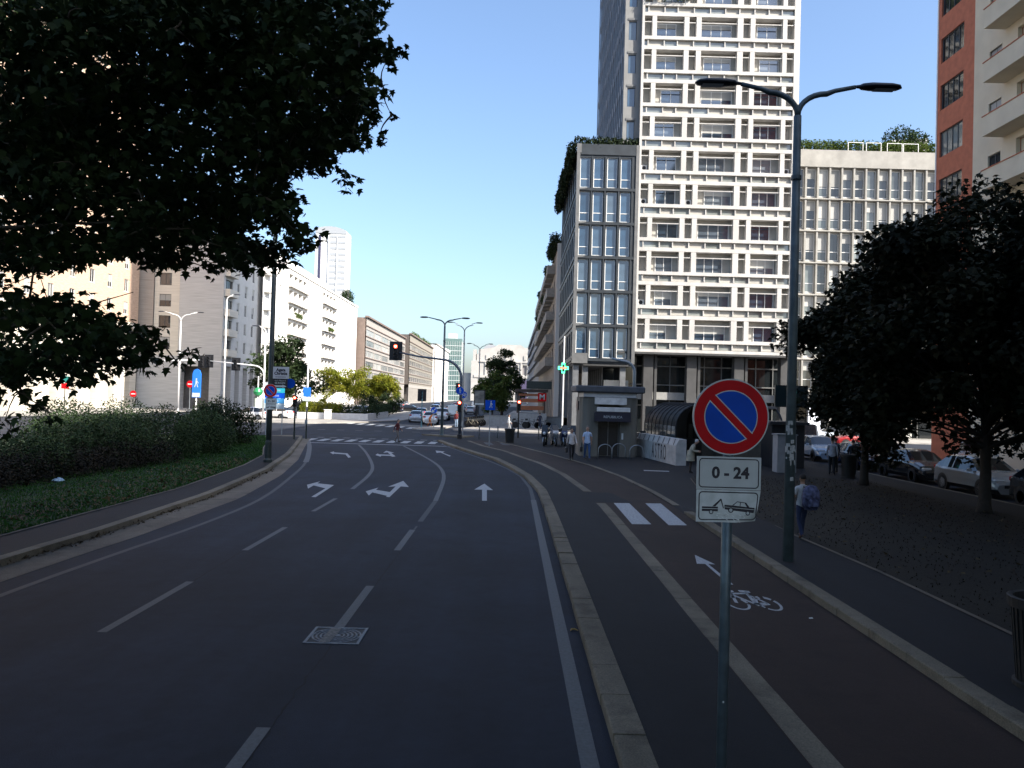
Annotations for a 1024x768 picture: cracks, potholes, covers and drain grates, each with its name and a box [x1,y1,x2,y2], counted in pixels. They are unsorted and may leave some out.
manhole cover [302,626,369,645]
